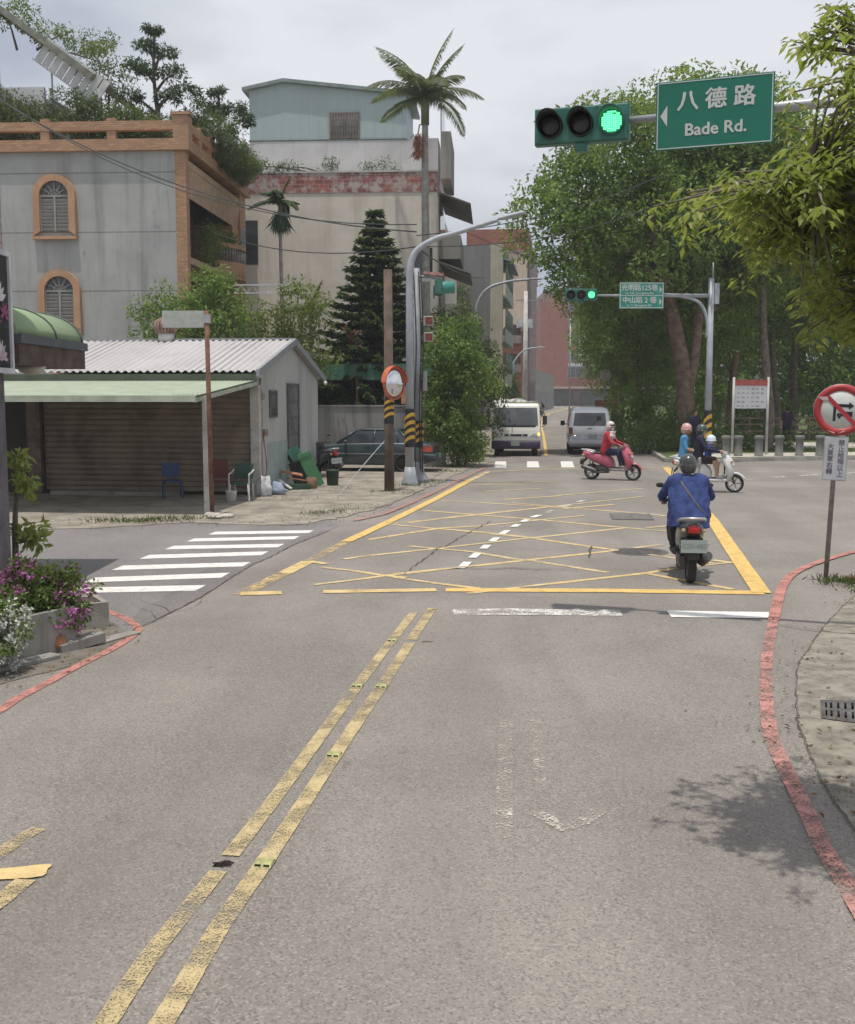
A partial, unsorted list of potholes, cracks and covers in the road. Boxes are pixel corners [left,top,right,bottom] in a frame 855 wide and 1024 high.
crack [404,521,489,574]
pothole [212,860,235,868]
drain grate [820,700,855,723]
